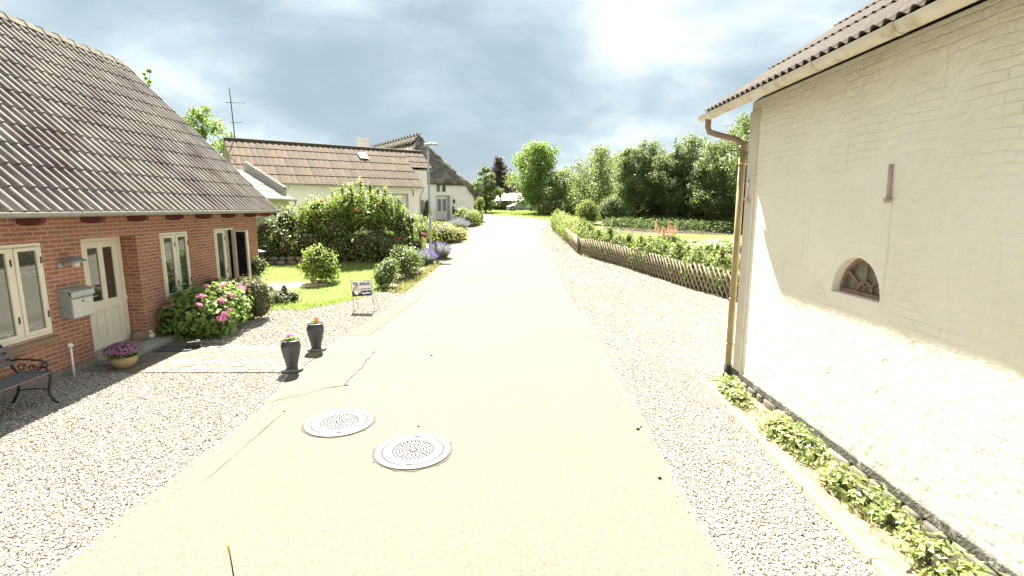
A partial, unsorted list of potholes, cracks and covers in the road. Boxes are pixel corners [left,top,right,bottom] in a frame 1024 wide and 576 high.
crack [208,351,375,478]
manhole cover [301,408,376,438]
manhole cover [372,433,452,472]
